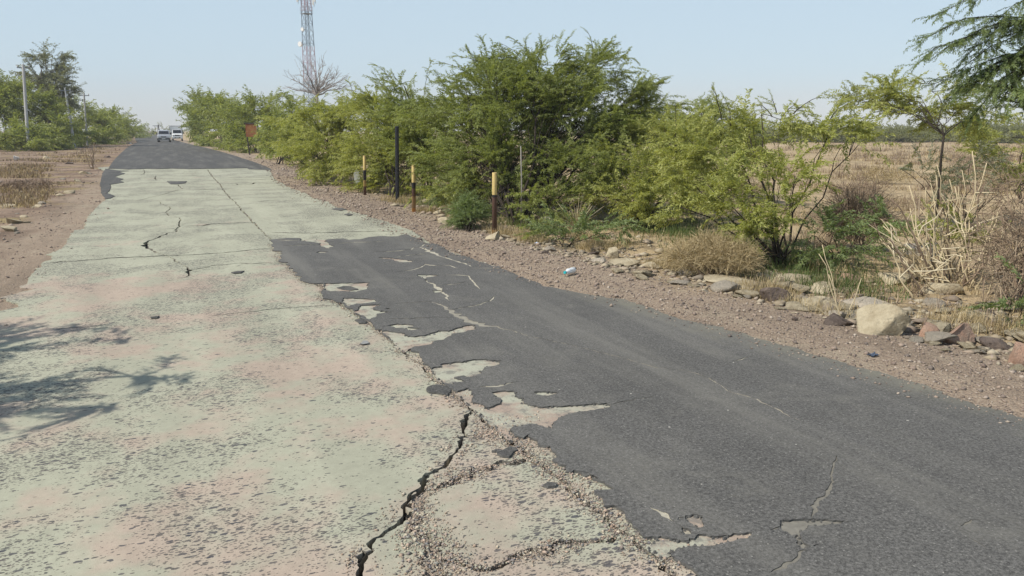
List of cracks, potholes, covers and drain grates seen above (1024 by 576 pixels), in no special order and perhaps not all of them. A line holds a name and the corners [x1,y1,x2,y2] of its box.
crack [773,457,837,571]
pothole [646,534,750,562]
crack [383,243,796,419]
crack [357,409,616,576]
pothole [780,519,847,549]
pothole [430,359,499,384]
pothole [456,388,610,443]
crack [53,170,259,281]
